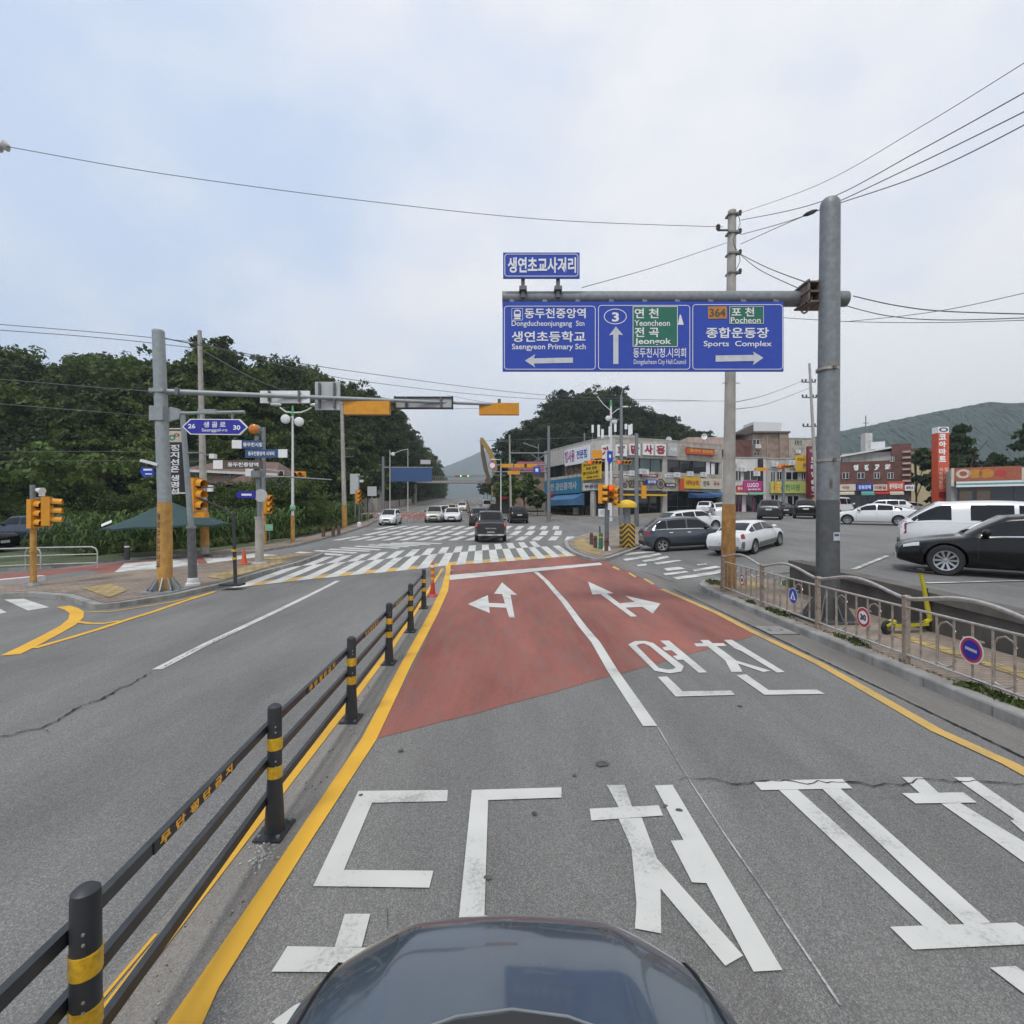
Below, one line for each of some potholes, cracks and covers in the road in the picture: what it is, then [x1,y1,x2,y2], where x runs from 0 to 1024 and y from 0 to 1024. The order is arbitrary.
crack [679,777,1024,787]
crack [1,673,149,736]
